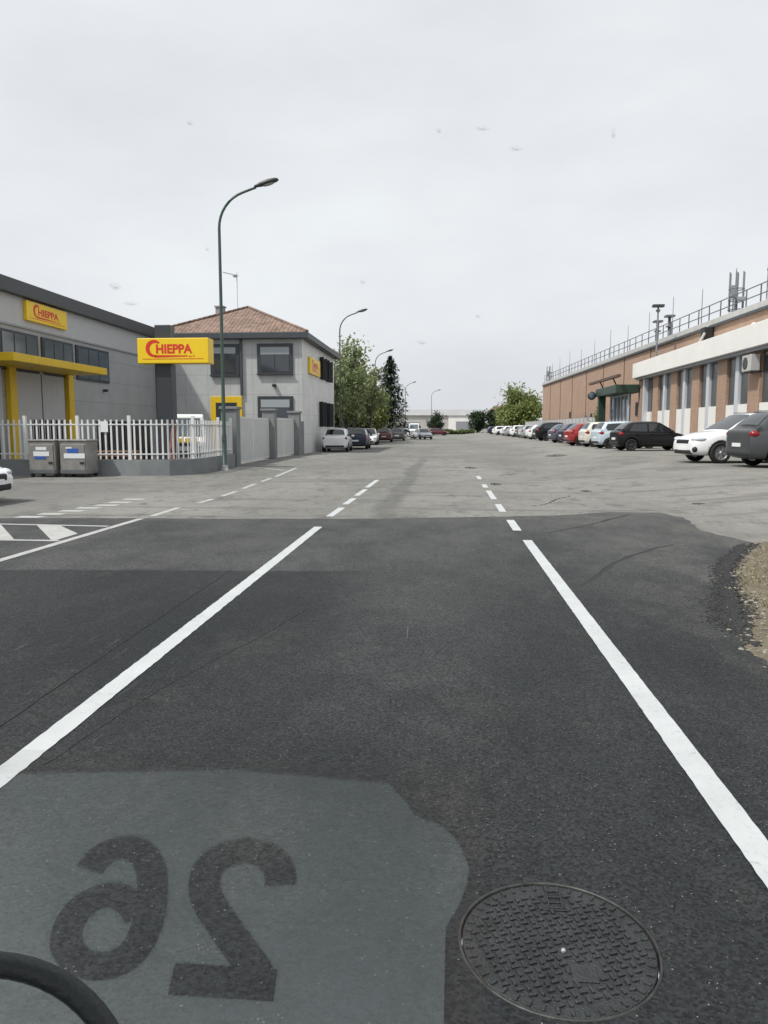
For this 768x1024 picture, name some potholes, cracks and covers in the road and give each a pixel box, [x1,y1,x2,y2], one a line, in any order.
manhole cover [458,882,664,1022]
